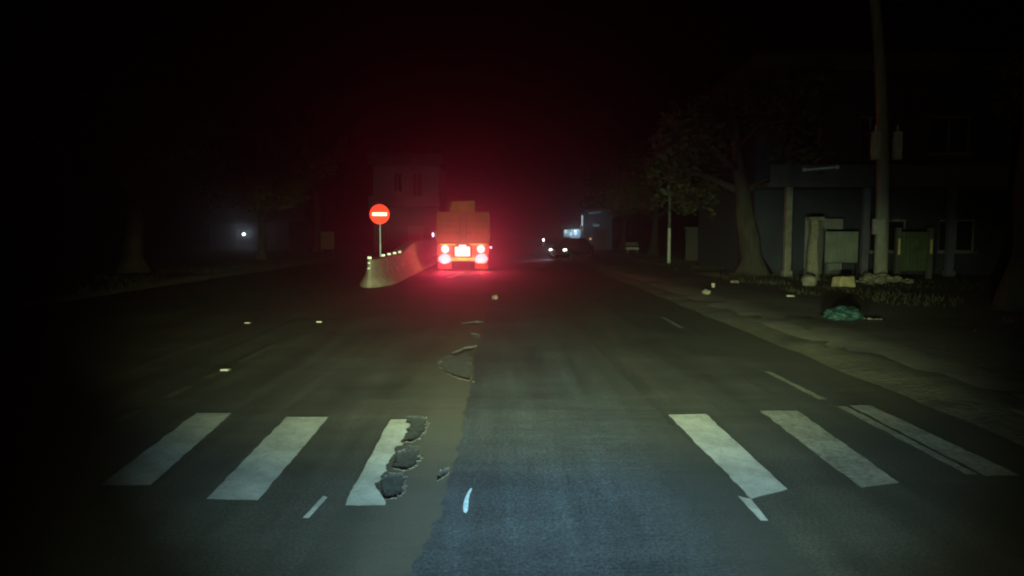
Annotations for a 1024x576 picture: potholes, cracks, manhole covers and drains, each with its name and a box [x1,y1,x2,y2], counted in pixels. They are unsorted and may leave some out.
pothole [391,446,424,471]
pothole [438,345,478,382]
pothole [379,471,408,500]
pothole [402,416,430,443]
